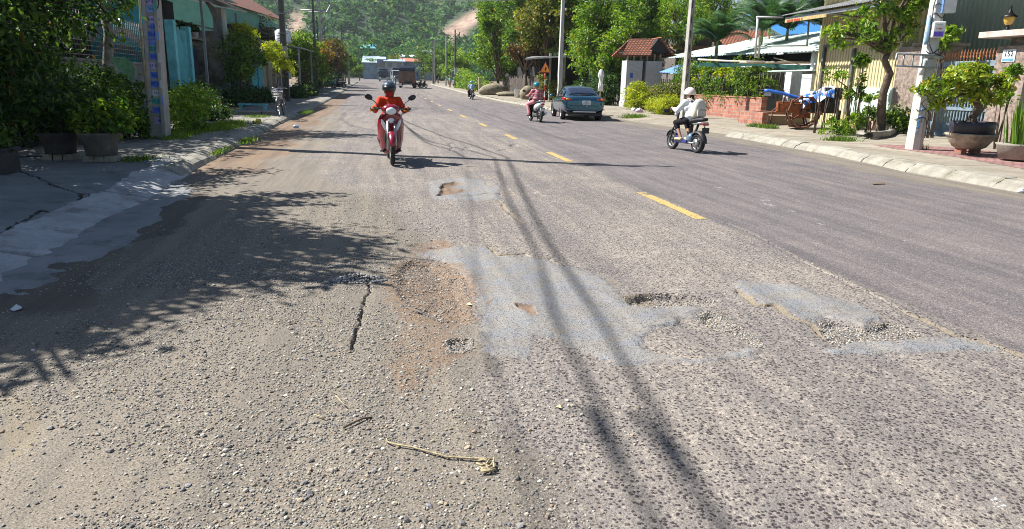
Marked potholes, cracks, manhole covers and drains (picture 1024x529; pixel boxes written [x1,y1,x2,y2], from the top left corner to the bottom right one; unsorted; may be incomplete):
pothole [515,302,535,315]
pothole [698,312,759,347]
pothole [624,293,720,308]
pothole [815,320,924,346]
crack [350,285,371,350]
pothole [392,260,477,325]
pothole [436,182,468,196]
